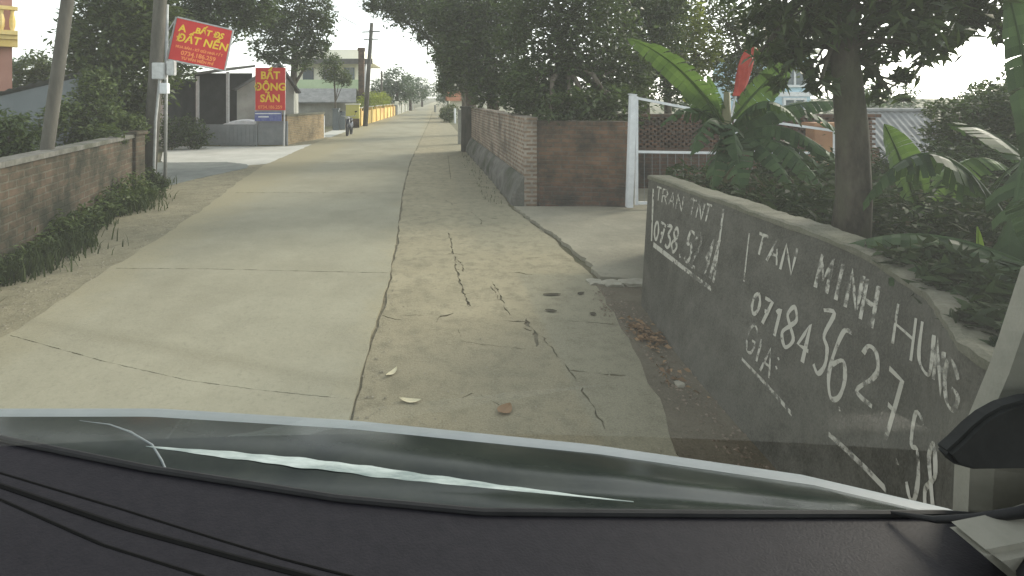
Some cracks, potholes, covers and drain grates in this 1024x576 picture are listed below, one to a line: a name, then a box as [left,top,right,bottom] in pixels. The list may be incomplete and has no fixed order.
crack [385,233,471,332]
crack [492,284,605,429]
